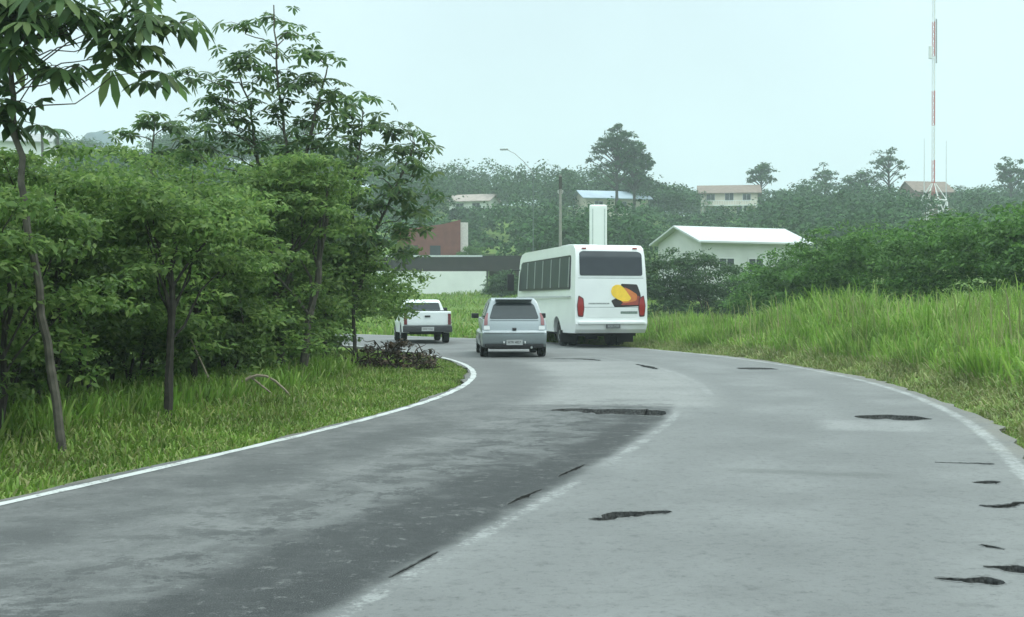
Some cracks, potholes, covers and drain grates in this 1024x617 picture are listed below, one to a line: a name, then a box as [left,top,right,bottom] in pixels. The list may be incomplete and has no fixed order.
pothole [588,510,672,521]
pothole [550,408,666,416]
pothole [935,574,1007,587]
pothole [983,563,1024,575]
